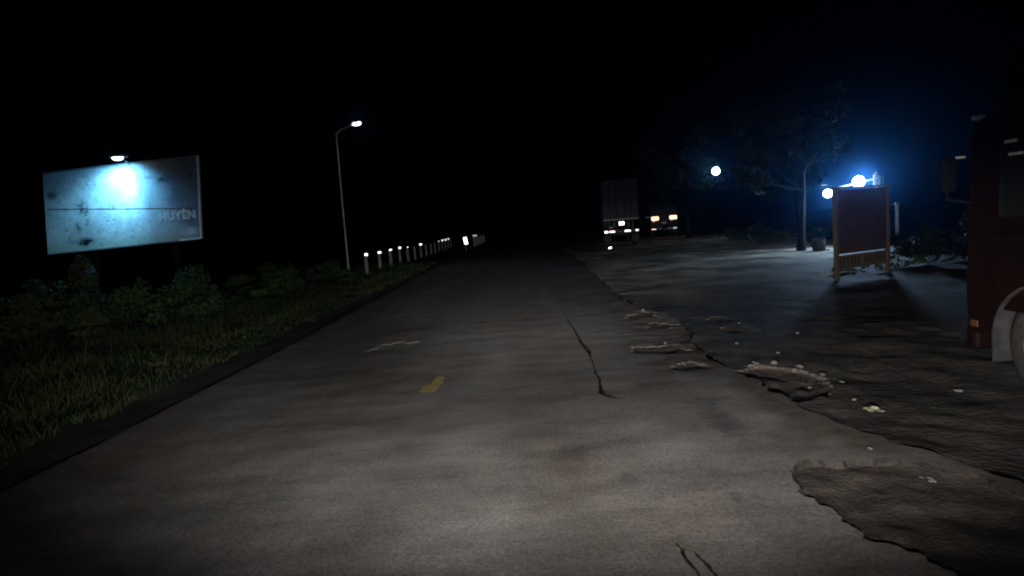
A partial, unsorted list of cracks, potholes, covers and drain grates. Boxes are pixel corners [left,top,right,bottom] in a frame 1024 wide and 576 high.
pothole [735,365,834,403]
crack [677,543,717,576]
pothole [629,344,694,354]
pothole [669,361,710,371]
pothole [624,311,659,319]
crack [468,313,618,399]
